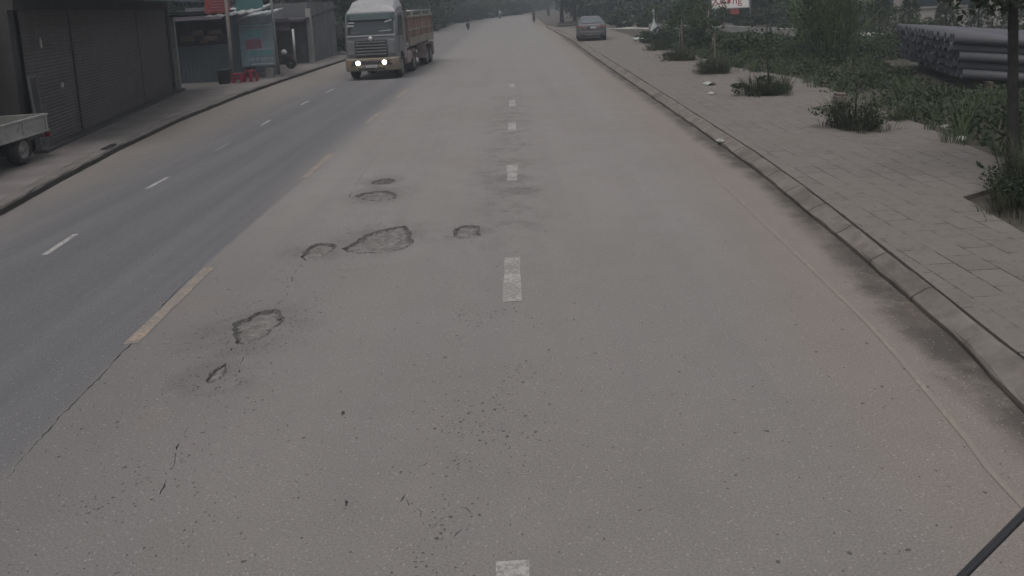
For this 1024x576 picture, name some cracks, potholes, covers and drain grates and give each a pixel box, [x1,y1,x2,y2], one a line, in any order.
pothole [206,363,227,384]
pothole [300,243,337,261]
pothole [453,225,481,239]
pothole [231,309,285,345]
pothole [342,225,414,254]
pothole [355,190,397,201]
